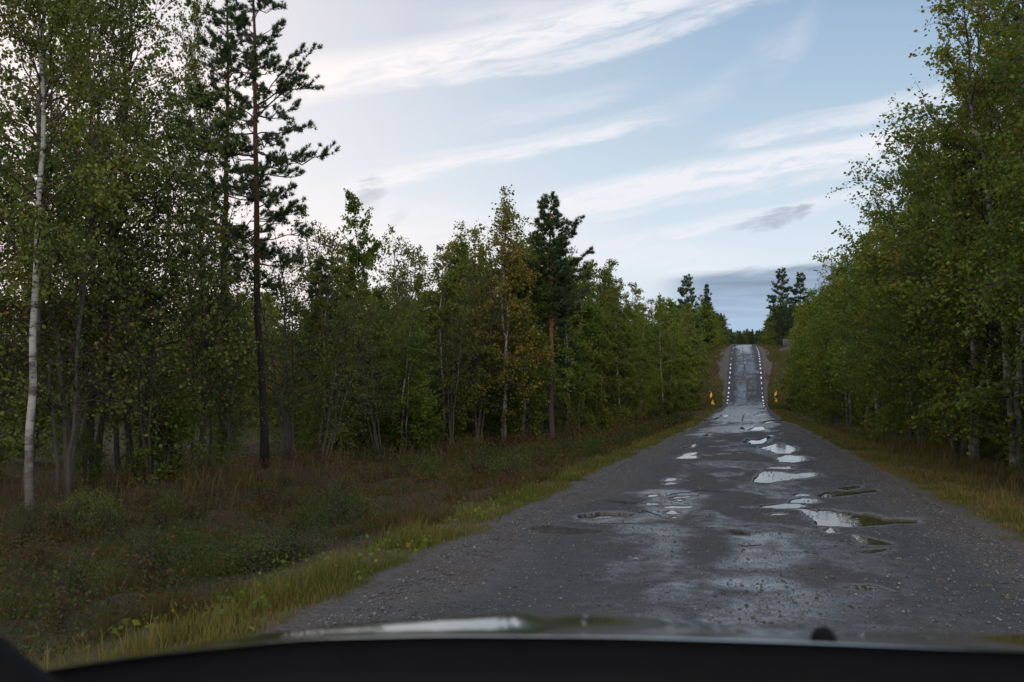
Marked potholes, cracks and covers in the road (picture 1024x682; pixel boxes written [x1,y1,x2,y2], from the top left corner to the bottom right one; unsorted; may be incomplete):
pothole [814,490,883,498]
pothole [774,455,814,463]
pothole [850,534,900,547]
pothole [750,471,823,483]
pothole [757,442,800,454]
pothole [741,436,773,444]
pothole [572,511,640,520]
pothole [791,508,926,528]
